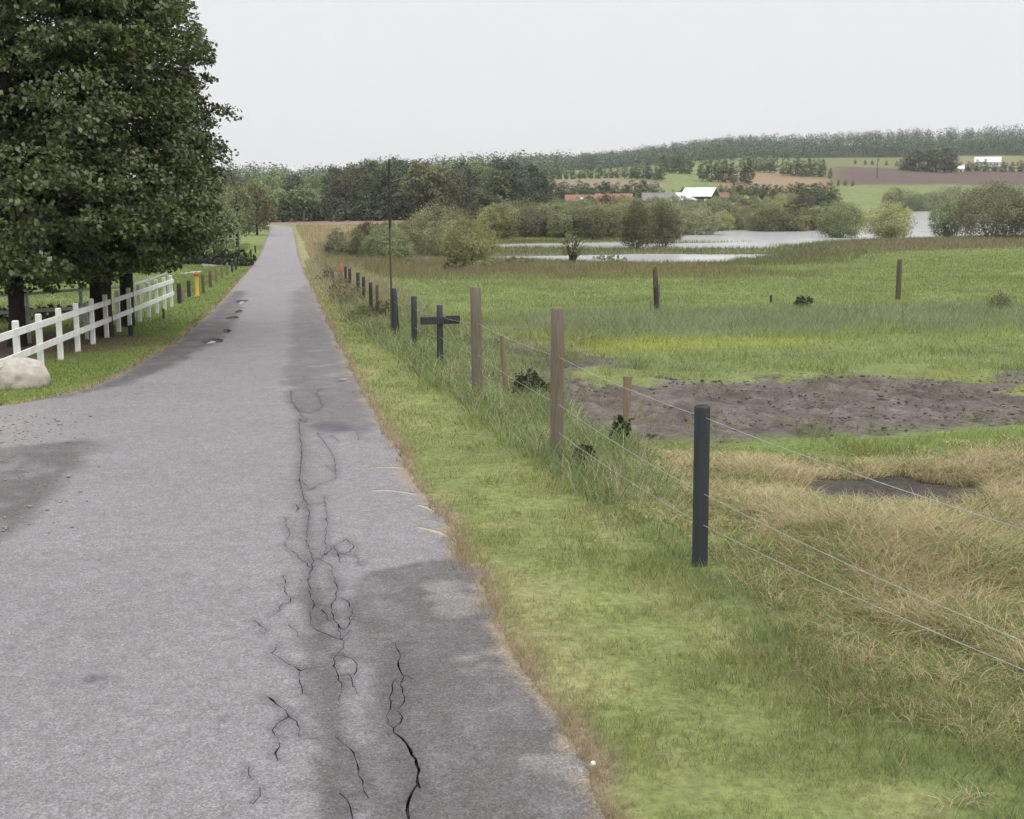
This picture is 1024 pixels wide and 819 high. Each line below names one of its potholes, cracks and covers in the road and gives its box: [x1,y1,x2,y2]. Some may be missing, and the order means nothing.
crack [284,391,359,700]
crack [335,737,369,819]
crack [386,639,421,819]
crack [257,575,314,760]
